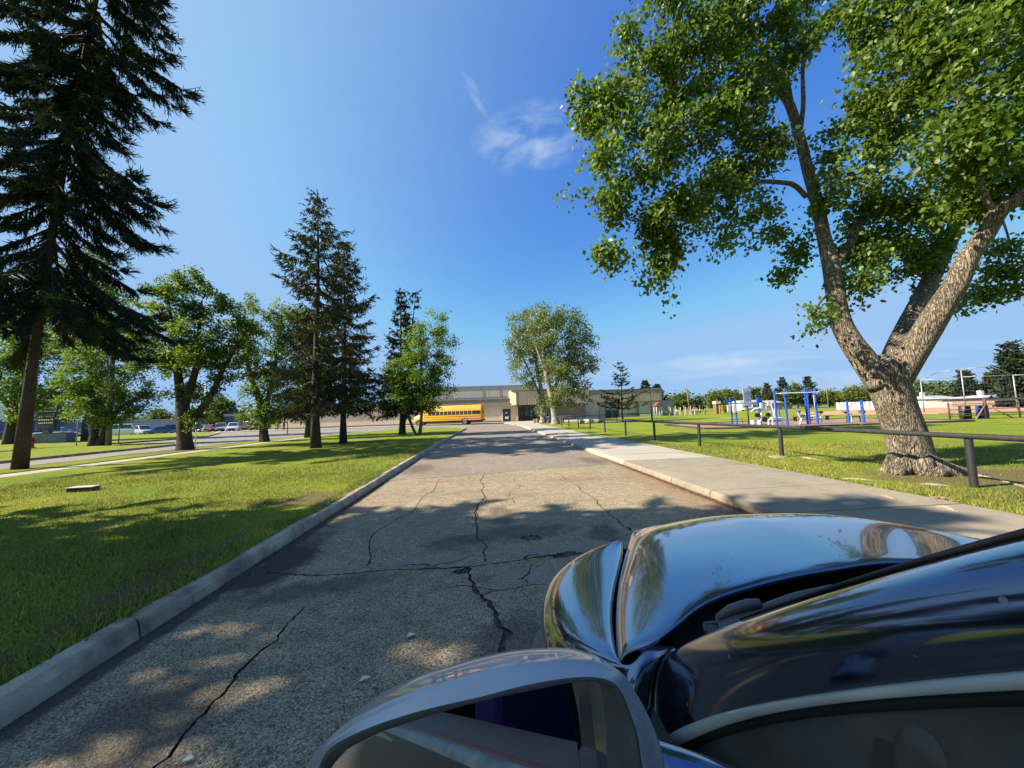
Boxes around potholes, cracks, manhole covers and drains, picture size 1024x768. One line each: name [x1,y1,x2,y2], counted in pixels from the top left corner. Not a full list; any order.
crack [509,471,634,532]
crack [152,605,307,768]
crack [267,475,584,653]
